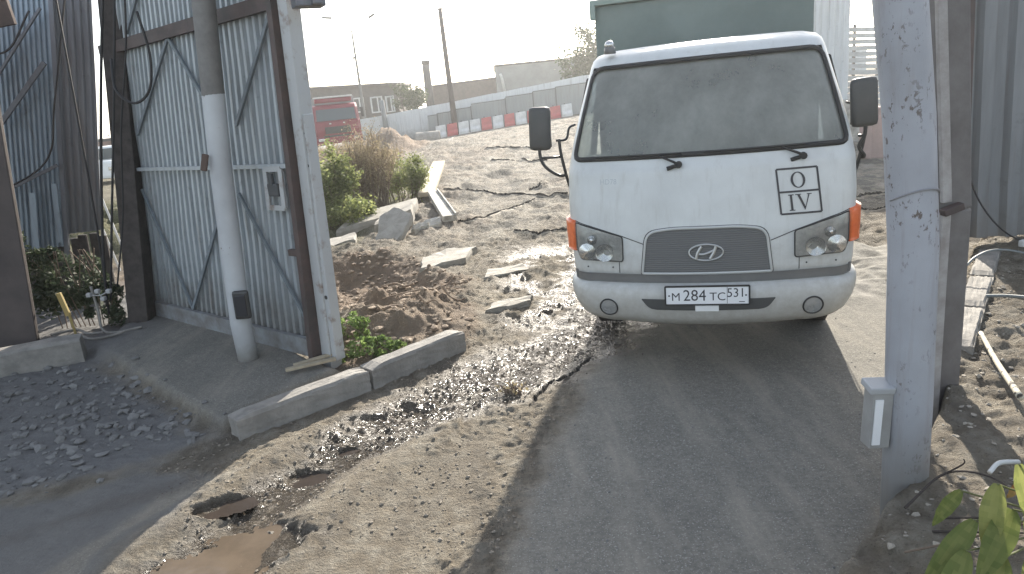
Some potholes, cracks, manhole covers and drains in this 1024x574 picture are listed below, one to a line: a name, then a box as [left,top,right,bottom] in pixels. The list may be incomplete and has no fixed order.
crack [443,182,568,237]
pothole [184,491,262,521]
pothole [282,466,336,489]
pothole [146,507,339,574]
crack [484,146,547,163]
crack [529,356,594,407]
